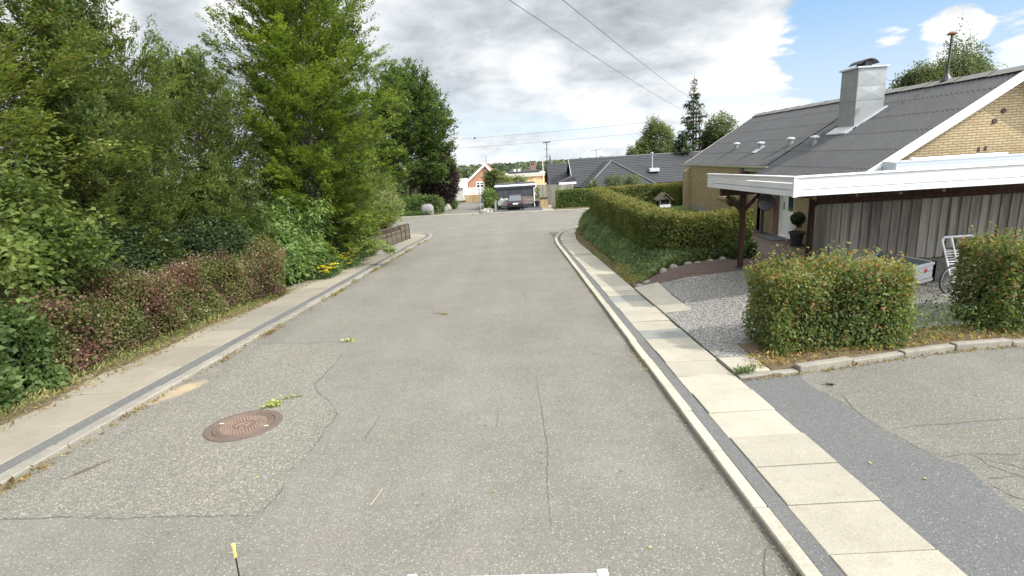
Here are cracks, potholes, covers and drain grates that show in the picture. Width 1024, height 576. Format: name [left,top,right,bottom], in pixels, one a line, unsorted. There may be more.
crack [827,392,1024,454]
crack [946,453,1023,499]
manhole cover [202,410,283,442]
crack [312,355,341,449]
crack [537,383,552,525]
